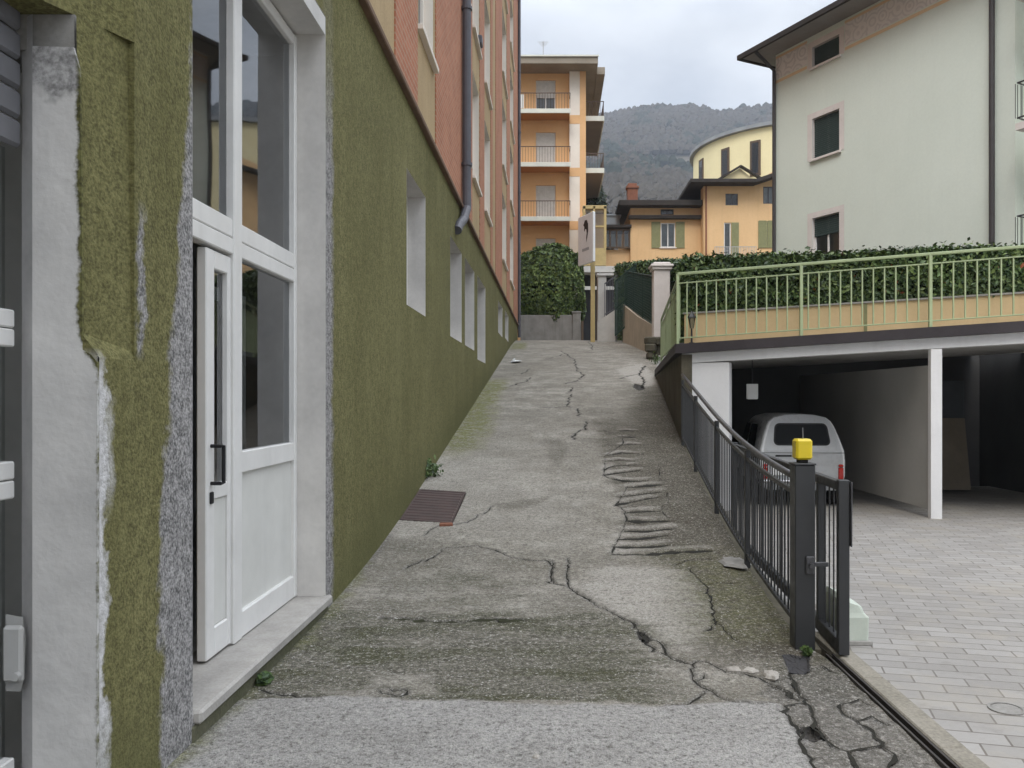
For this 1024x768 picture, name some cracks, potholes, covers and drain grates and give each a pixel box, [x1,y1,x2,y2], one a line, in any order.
crack [555,343,593,440]
crack [479,546,899,768]
